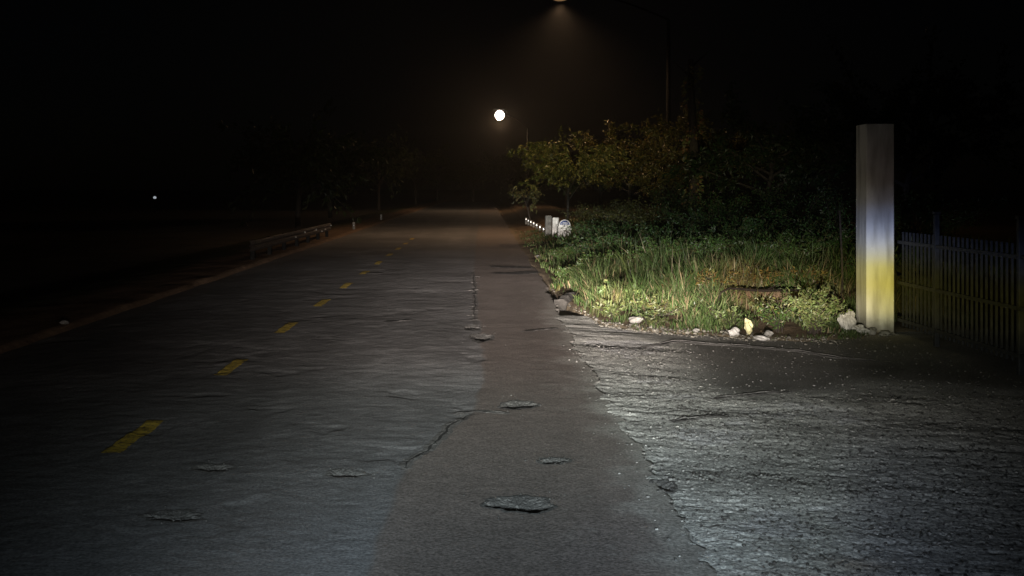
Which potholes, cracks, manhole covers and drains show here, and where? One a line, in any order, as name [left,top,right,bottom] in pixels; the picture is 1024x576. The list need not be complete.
pothole [323,468,372,479]
pothole [536,457,572,465]
crack [399,409,510,470]
crack [669,390,791,423]
pothole [480,495,558,515]
pothole [190,464,238,473]
pothole [137,509,206,523]
pothole [468,333,495,342]
pothole [649,479,678,494]
pothole [497,400,542,410]
